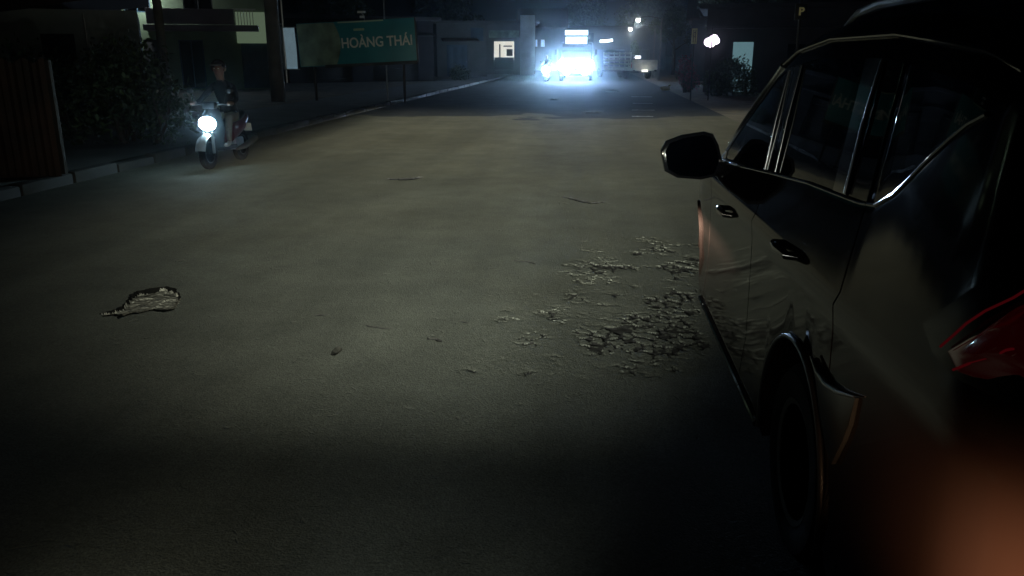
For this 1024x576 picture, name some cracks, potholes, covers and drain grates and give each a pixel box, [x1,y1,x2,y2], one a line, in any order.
crack [427,234,716,384]
crack [562,196,603,204]
pothole [100,286,181,319]
